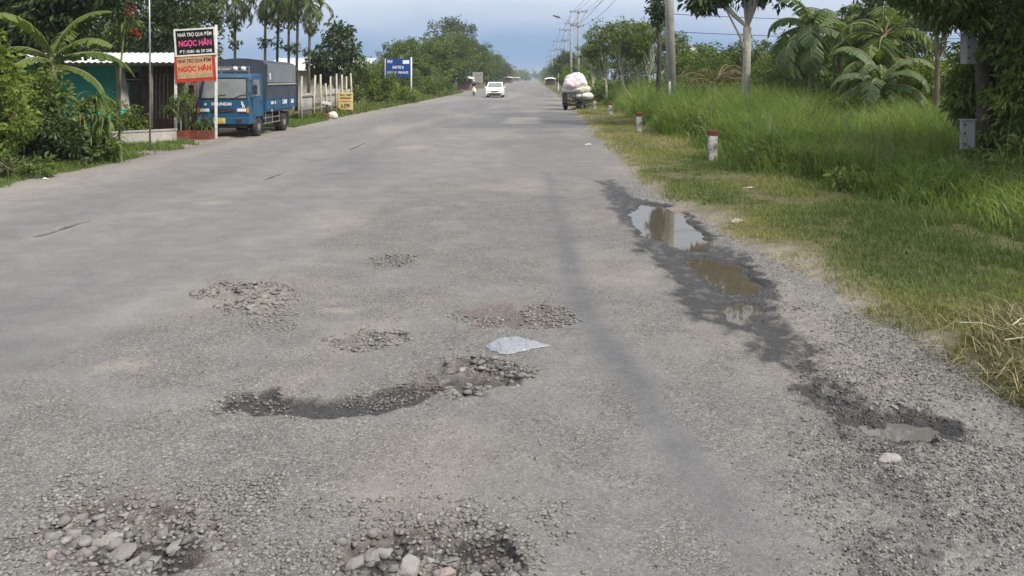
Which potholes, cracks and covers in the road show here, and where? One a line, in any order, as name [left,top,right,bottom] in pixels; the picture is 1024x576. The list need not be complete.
pothole [210,382,443,420]
pothole [593,179,803,345]
pothole [366,252,420,268]
pothole [20,488,252,576]
pothole [322,328,421,354]
pothole [411,355,541,398]
pothole [449,299,578,330]
pothole [318,515,536,576]
pothole [790,376,955,445]
